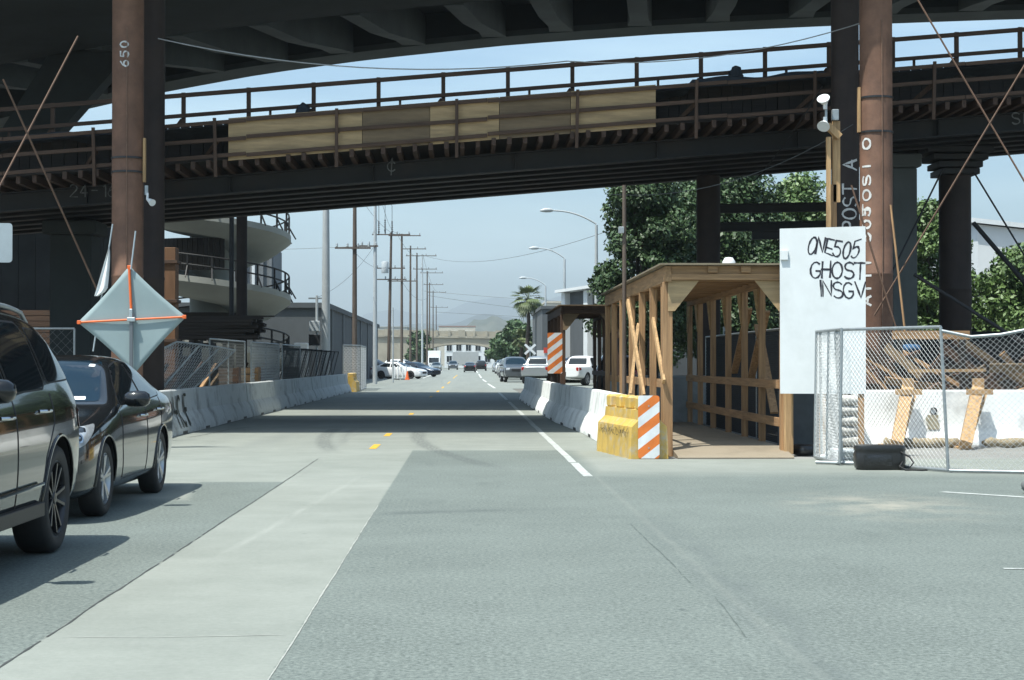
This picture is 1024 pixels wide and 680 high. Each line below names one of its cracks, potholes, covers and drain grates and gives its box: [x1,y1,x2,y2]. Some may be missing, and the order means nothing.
crack [630,523,746,637]
